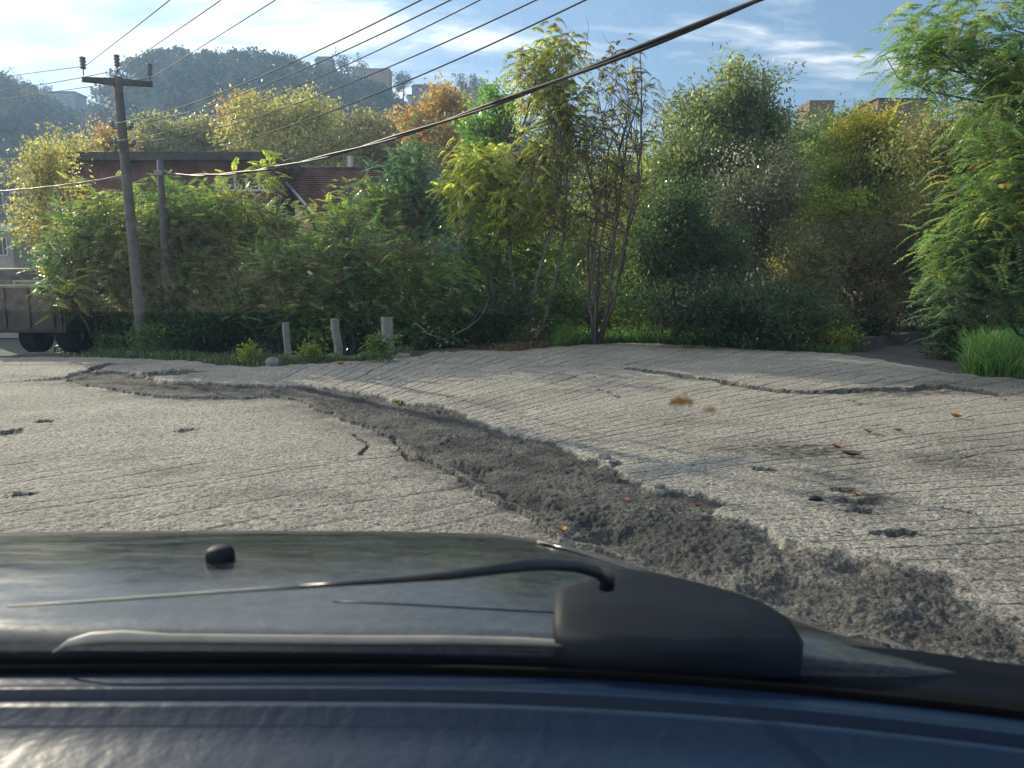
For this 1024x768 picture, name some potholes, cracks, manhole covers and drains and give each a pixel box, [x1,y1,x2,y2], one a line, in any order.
pothole [62,369,1024,666]
crack [352,433,370,455]
pothole [2,491,40,499]
pothole [0,428,24,437]
crack [597,367,1004,398]
